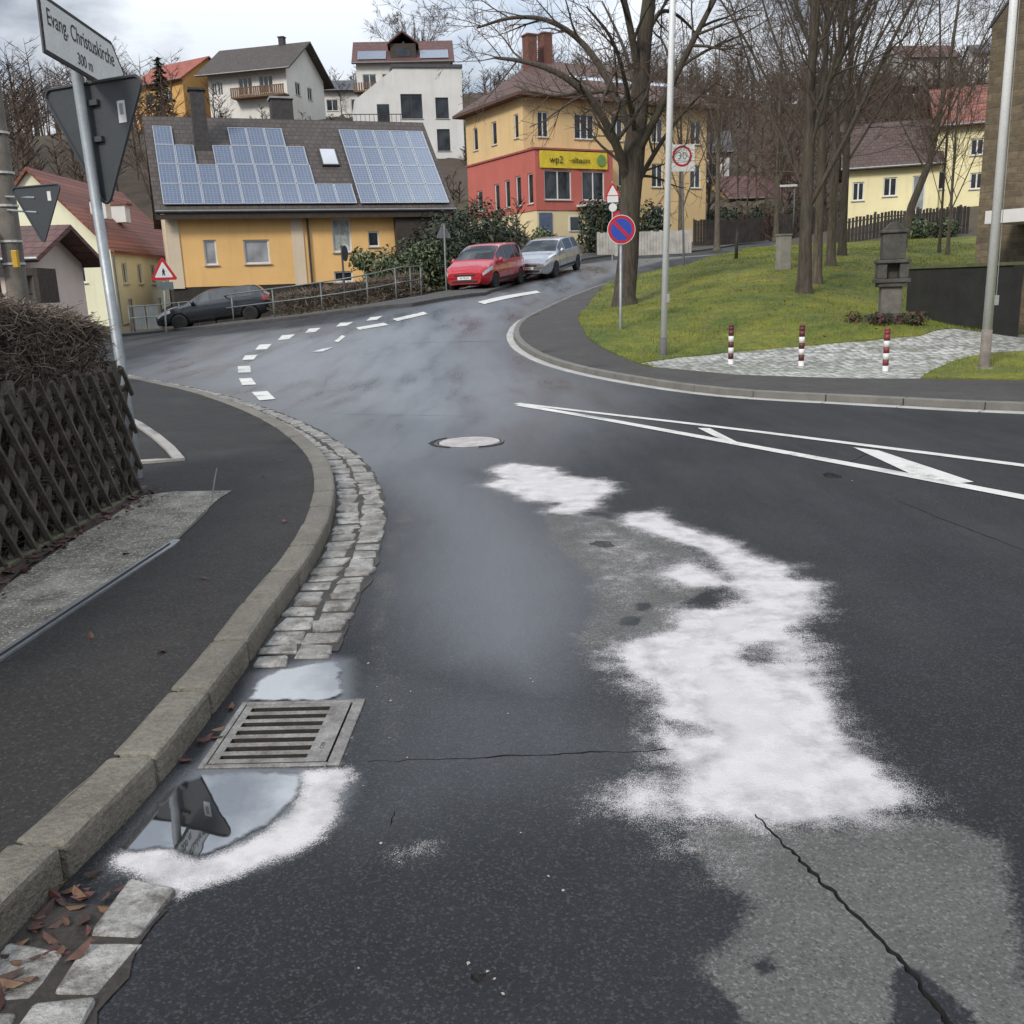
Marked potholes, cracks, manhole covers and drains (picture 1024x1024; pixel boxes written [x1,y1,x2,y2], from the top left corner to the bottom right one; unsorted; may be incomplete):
crack [755,814,953,1024]
crack [368,748,673,762]
manhole cover [428,436,505,448]
drain grate [198,699,365,769]
crack [889,498,1023,550]
